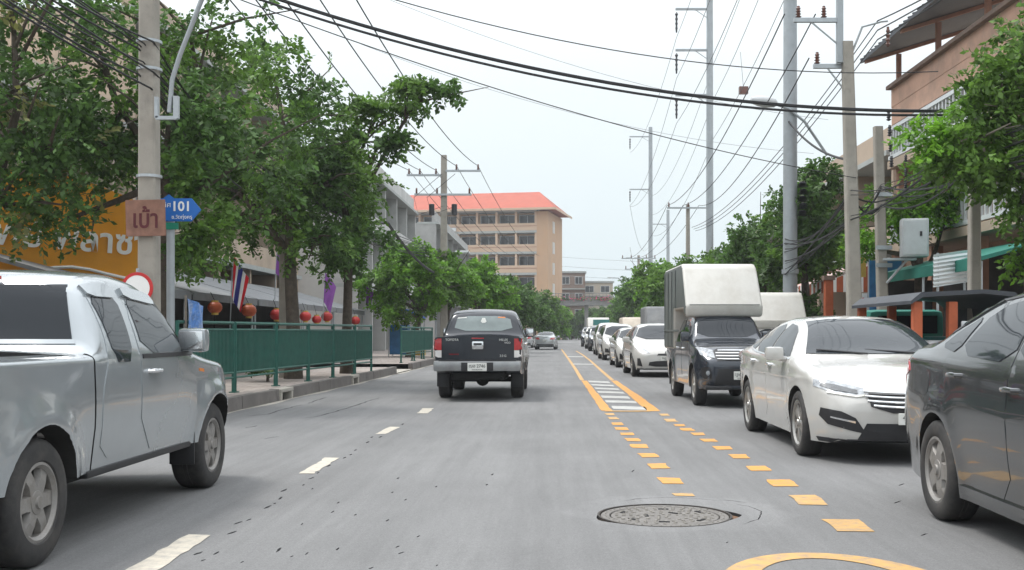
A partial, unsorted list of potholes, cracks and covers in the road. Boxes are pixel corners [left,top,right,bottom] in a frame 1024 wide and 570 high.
crack [246,397,378,439]
manhole cover [597,504,741,527]
